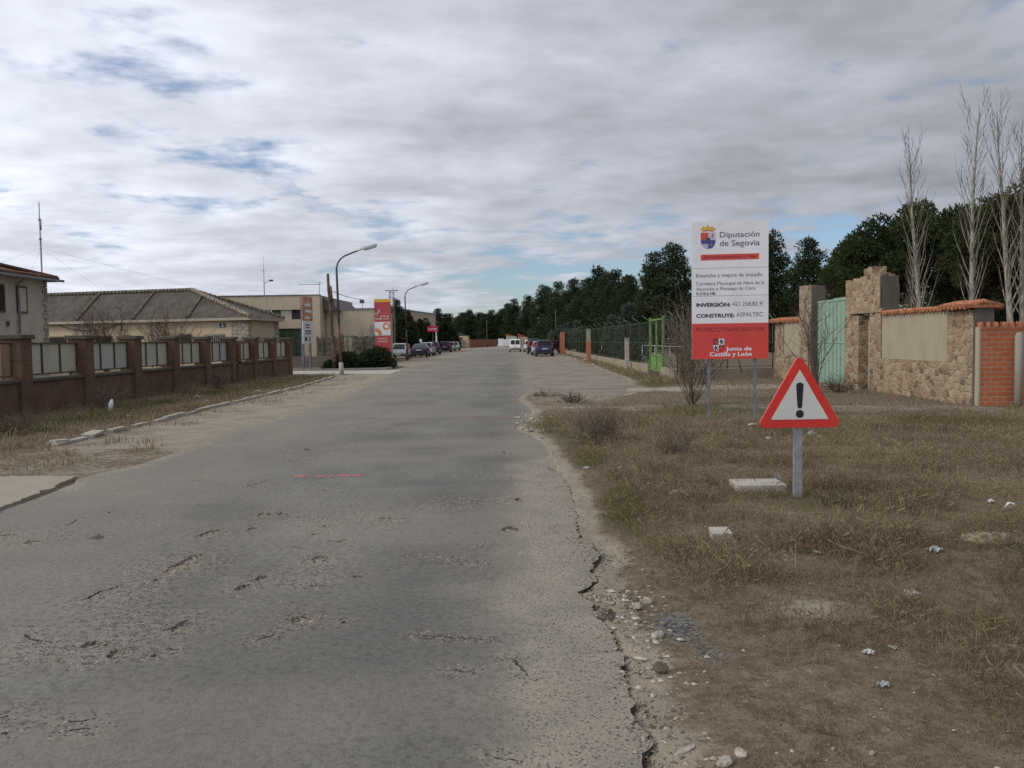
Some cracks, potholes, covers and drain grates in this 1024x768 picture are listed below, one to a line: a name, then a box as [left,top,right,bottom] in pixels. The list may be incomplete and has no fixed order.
pothole [106,649,126,658]
crack [510,658,528,676]
pothole [164,554,204,574]
pothole [289,615,315,624]
pothole [311,555,329,563]
pothole [195,529,220,538]
pothole [162,619,189,634]
pothole [80,640,108,648]
